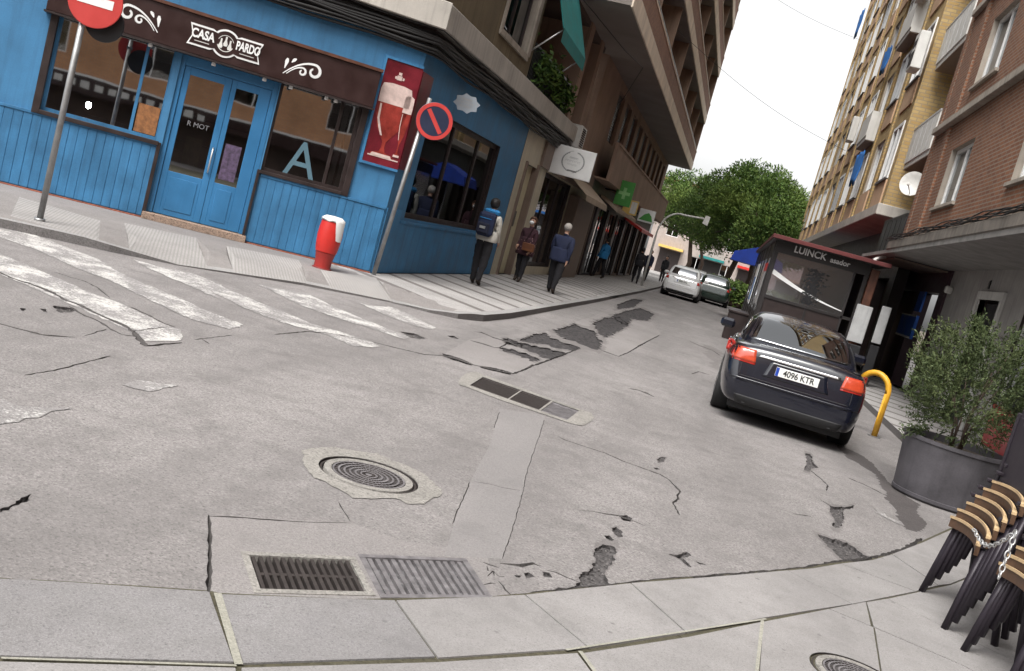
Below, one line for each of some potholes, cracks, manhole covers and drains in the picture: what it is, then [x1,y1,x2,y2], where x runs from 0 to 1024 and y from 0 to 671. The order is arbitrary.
pothole [818,534,872,562]
crack [560,437,681,515]
pothole [576,544,617,588]
pothole [829,505,854,528]
manhole cover [301,447,442,504]
pothole [669,552,691,567]
drain grate [241,551,376,596]
manhole cover [810,653,877,671]
drain grate [358,554,492,598]
